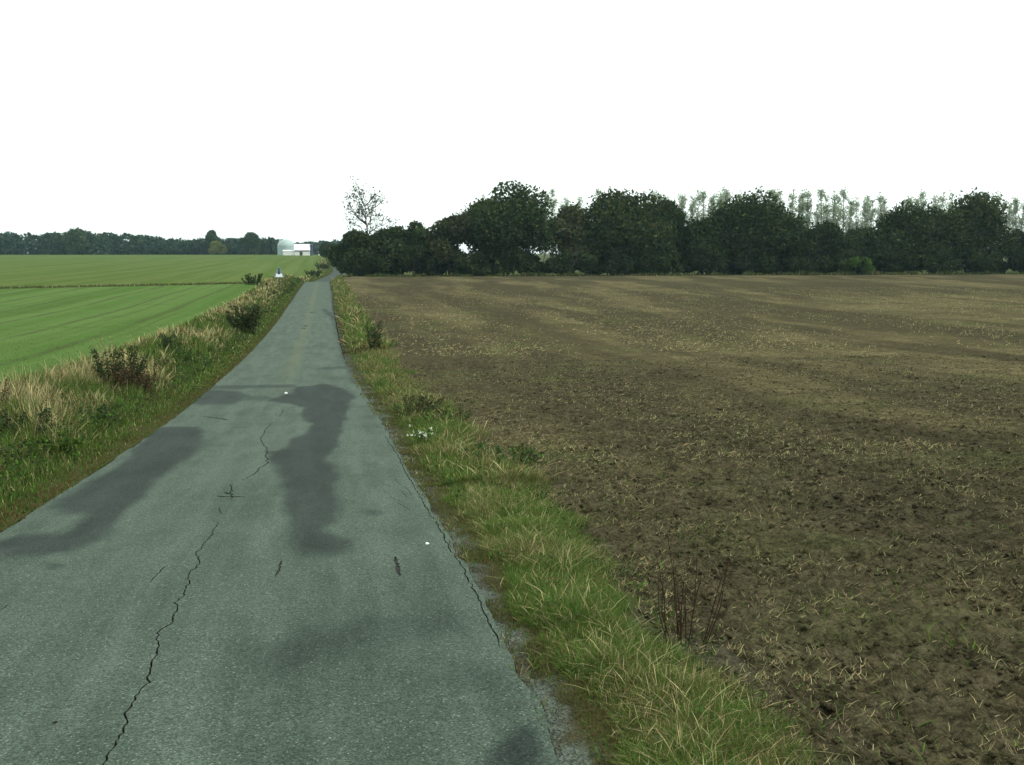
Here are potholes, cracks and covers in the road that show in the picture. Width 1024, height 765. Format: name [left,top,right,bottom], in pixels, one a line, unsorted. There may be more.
crack [382,437,500,647]
crack [102,410,284,765]
